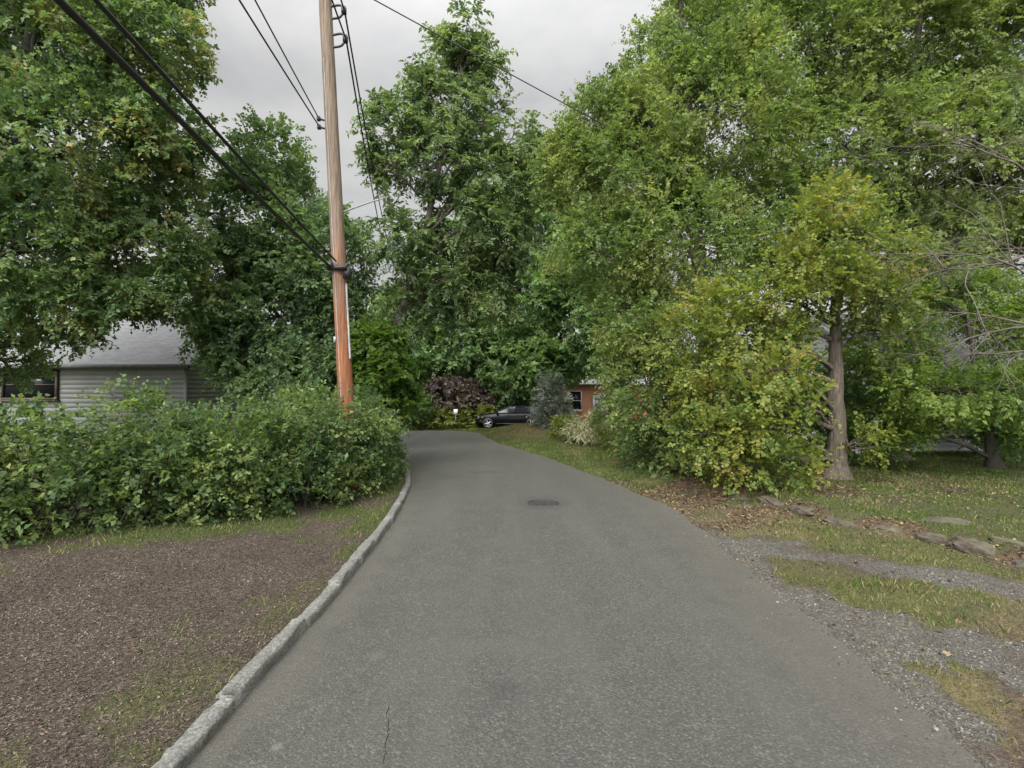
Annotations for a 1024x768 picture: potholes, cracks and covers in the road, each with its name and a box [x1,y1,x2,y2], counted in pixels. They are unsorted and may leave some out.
manhole cover [525,498,562,506]
crack [383,700,391,765]
